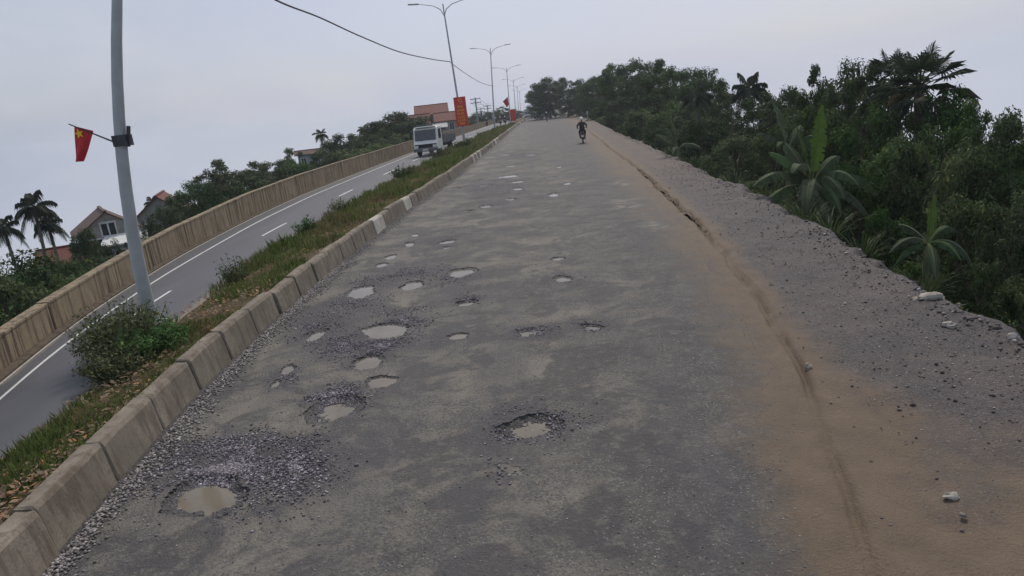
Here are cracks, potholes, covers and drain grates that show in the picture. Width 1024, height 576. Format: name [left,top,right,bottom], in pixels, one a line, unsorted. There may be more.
pothole [349,352,386,370]
pothole [494,413,566,441]
crack [636,167,707,233]
pothole [445,267,479,278]
pothole [513,328,544,338]
pothole [157,475,251,519]
pothole [397,280,425,291]
pothole [365,375,399,388]
pothole [444,332,470,340]
pothole [302,395,367,425]
pothole [359,322,411,339]
pothole [344,285,376,299]
